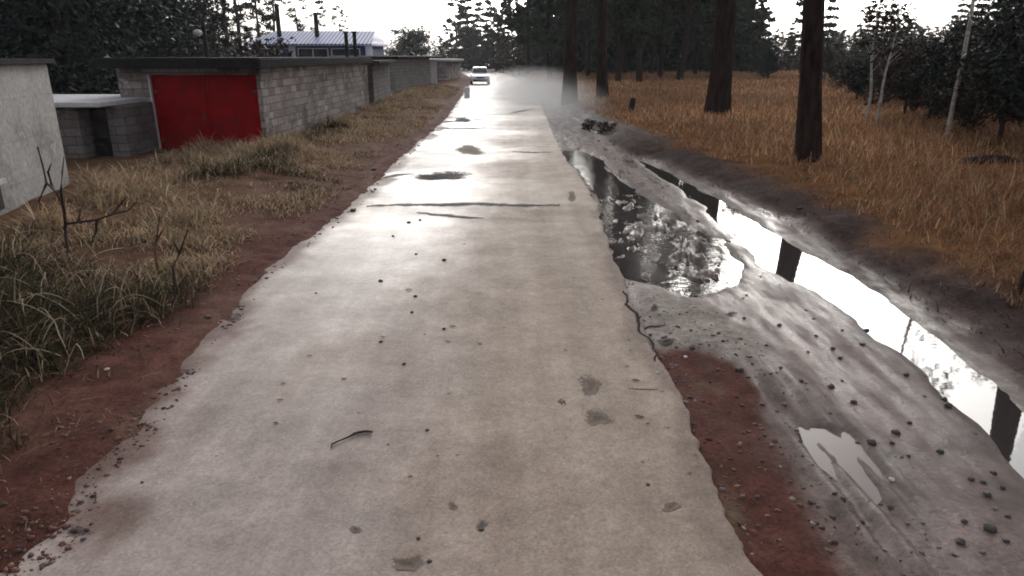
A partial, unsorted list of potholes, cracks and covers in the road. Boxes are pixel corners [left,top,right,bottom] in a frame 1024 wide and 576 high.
pothole [411,170,471,180]
crack [366,202,560,219]
pothole [454,144,485,155]
crack [622,291,664,361]
